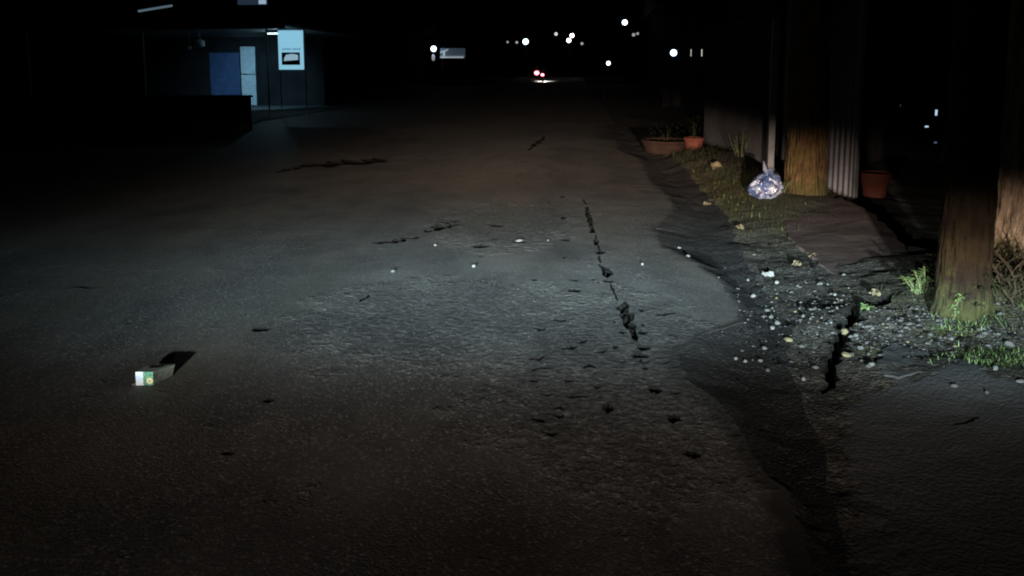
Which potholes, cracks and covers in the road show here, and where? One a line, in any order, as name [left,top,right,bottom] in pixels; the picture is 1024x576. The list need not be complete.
crack [527,136,546,150]
crack [276,157,388,172]
crack [371,220,526,257]
crack [820,290,904,395]
